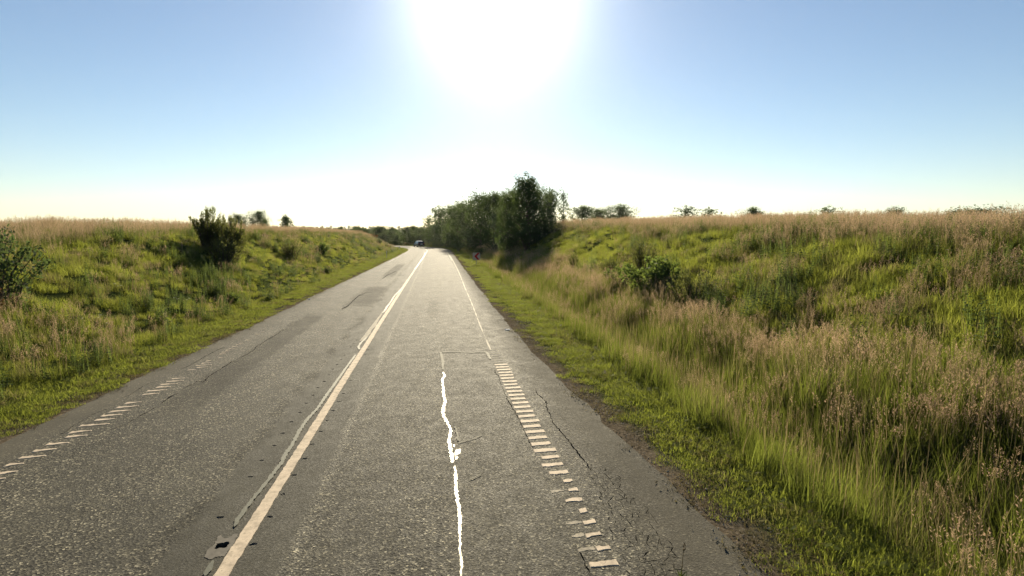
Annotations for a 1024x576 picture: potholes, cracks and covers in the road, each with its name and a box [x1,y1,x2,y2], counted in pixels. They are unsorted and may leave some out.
crack [536,391,687,576]
pothole [204,534,238,559]
